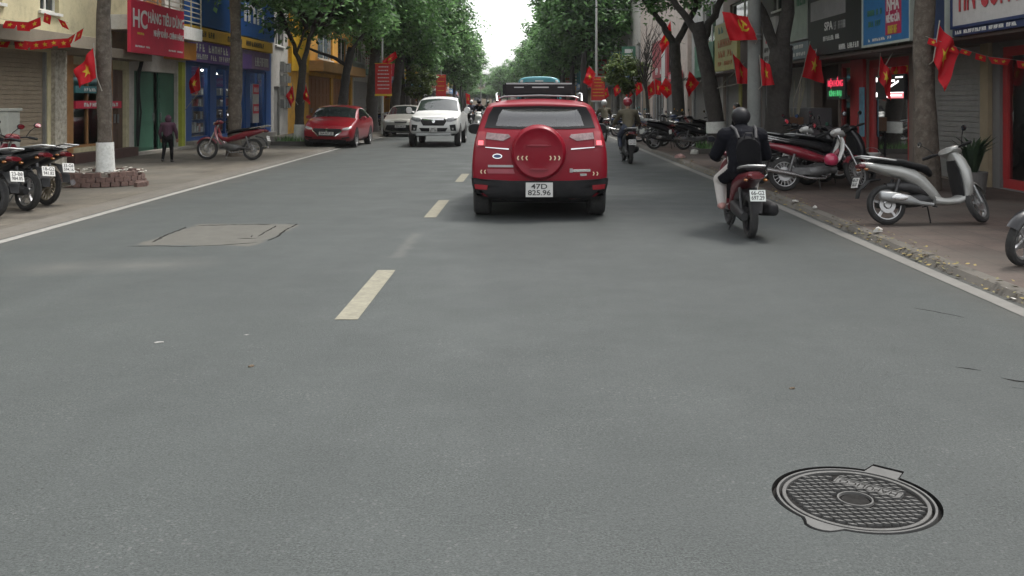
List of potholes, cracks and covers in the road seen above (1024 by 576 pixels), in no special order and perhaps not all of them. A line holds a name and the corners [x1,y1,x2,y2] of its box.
manhole cover [772,464,944,535]
